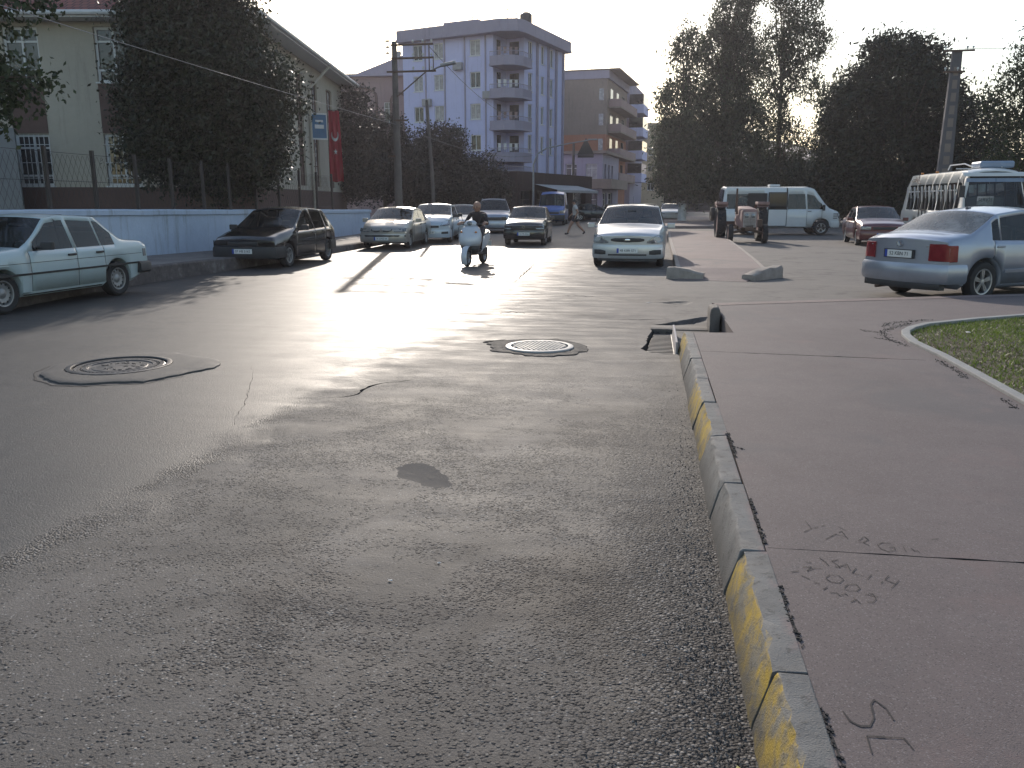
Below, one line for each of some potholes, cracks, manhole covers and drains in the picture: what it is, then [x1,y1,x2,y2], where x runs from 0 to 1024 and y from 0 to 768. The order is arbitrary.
drain grate [641,325,678,354]
manhole cover [39,352,221,385]
crack [331,380,408,398]
manhole cover [483,339,589,357]
crack [860,319,929,347]
